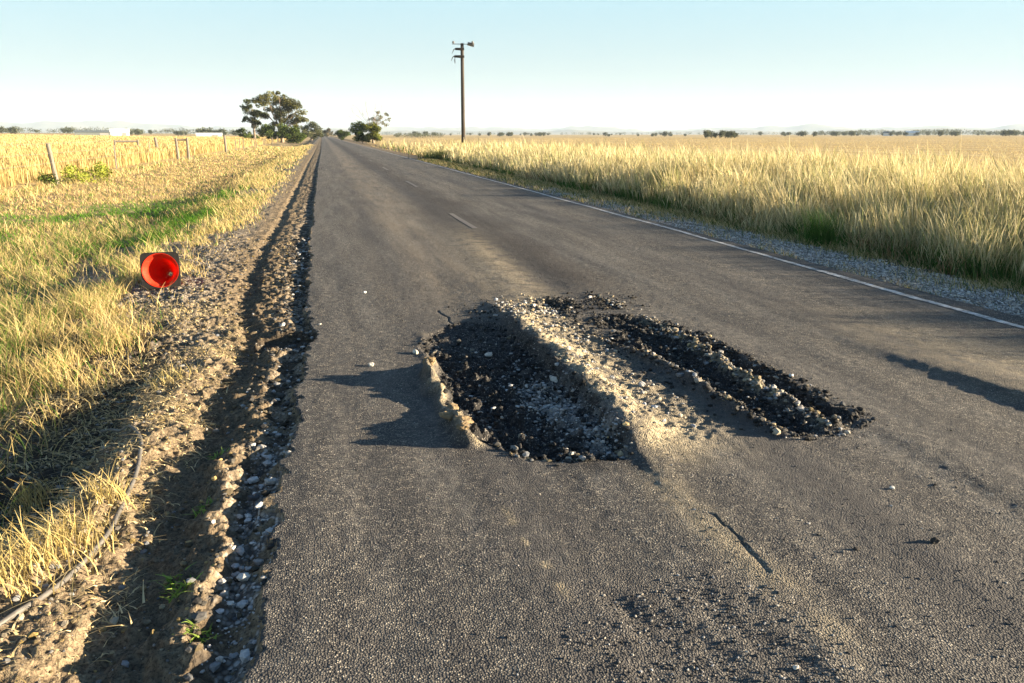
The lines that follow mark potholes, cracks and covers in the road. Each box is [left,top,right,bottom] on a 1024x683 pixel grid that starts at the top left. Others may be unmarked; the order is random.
pothole [527,297,575,314]
pothole [597,315,861,437]
crack [709,512,769,573]
pothole [417,321,632,464]
